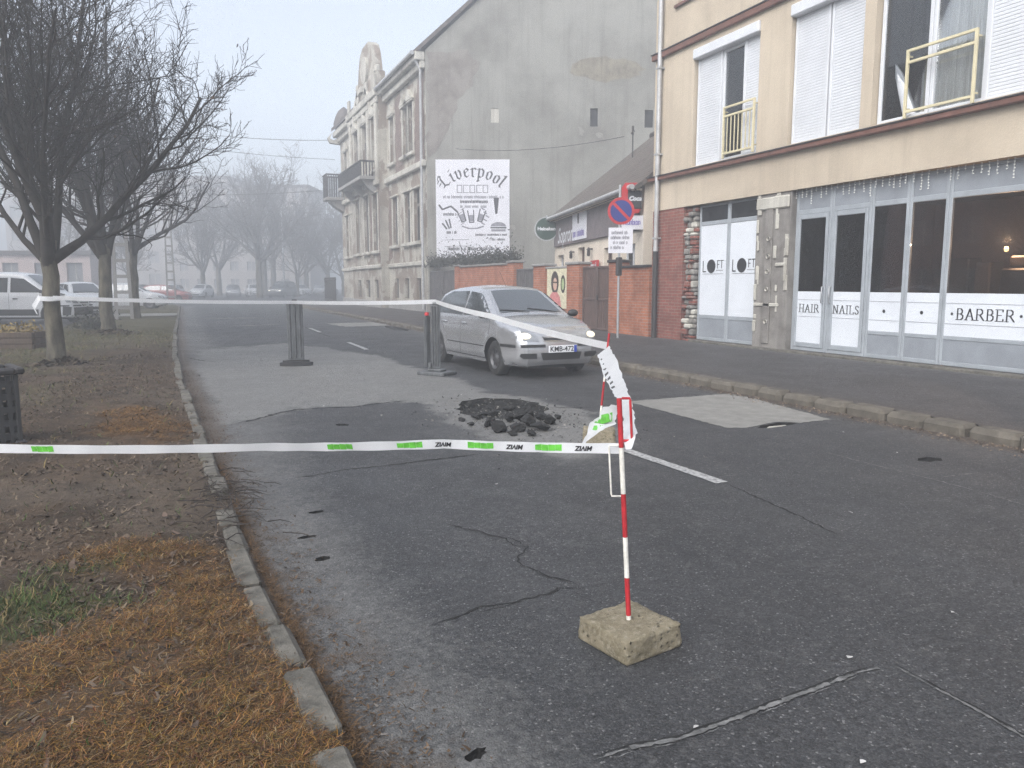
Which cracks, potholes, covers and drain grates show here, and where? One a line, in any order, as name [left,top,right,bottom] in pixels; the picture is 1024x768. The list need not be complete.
crack [302,453,481,477]
pothole [457,398,549,419]
crack [432,522,603,625]
pothole [465,747,487,762]
